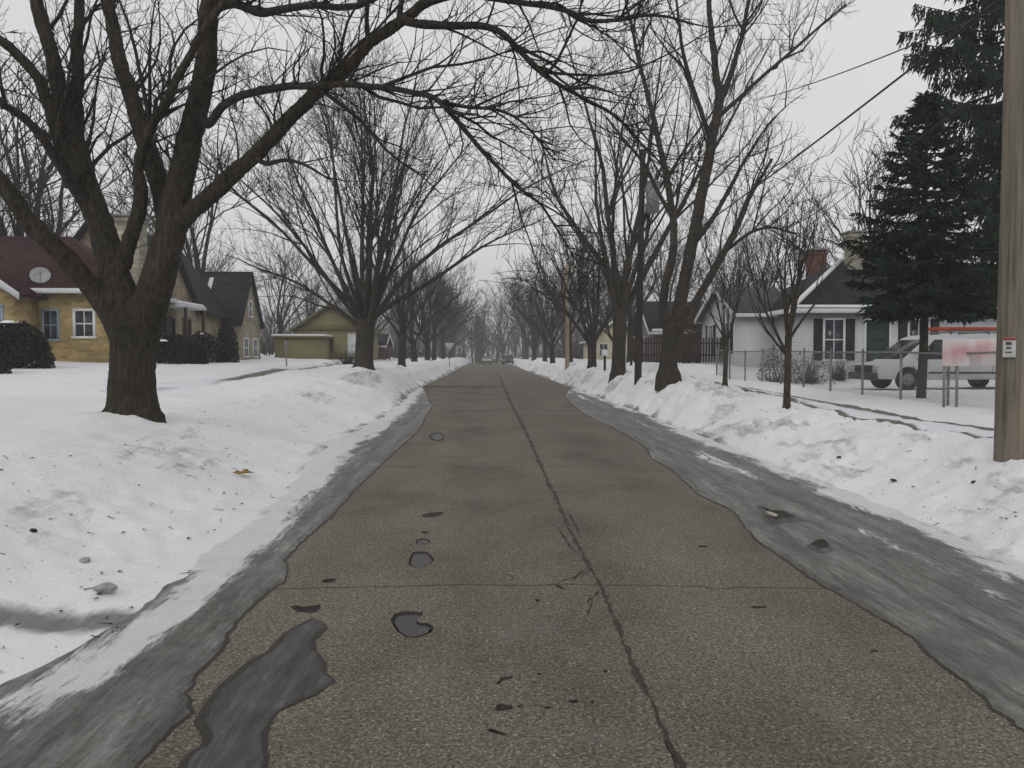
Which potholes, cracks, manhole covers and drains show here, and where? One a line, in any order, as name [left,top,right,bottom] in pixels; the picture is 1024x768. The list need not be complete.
pothole [805,539,833,554]
crack [274,370,826,768]
pothole [493,704,513,712]
pothole [390,611,435,638]
pothole [409,551,435,567]
pothole [756,505,806,525]
